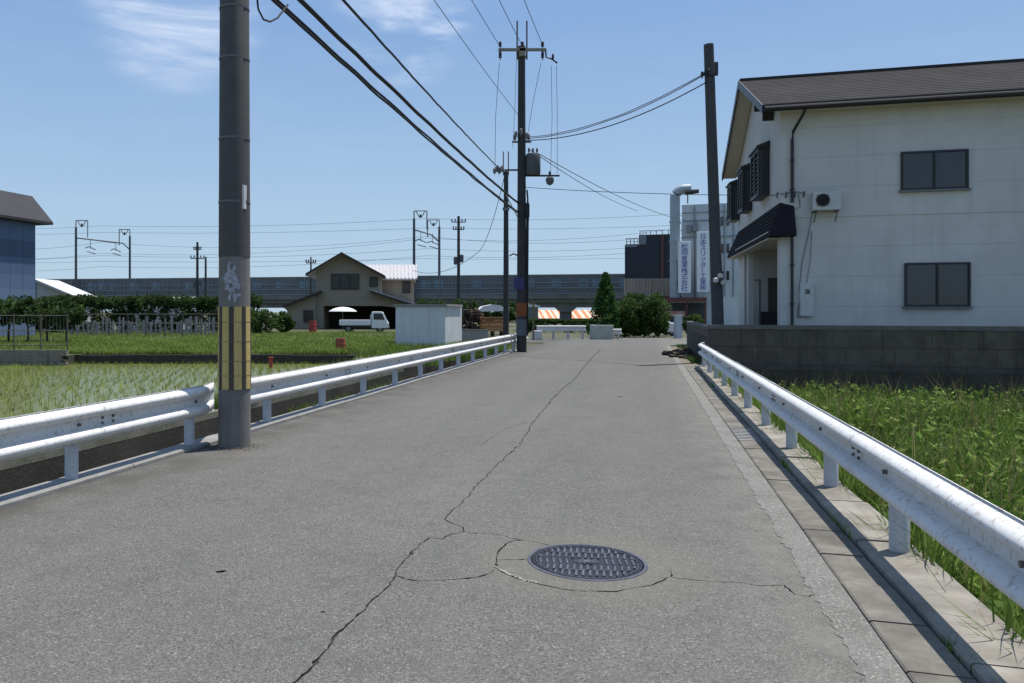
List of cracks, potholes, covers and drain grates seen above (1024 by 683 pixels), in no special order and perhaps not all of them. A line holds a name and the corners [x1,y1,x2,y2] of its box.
manhole cover [527,544,648,582]
crack [293,350,813,683]
drain grate [729,427,762,441]
